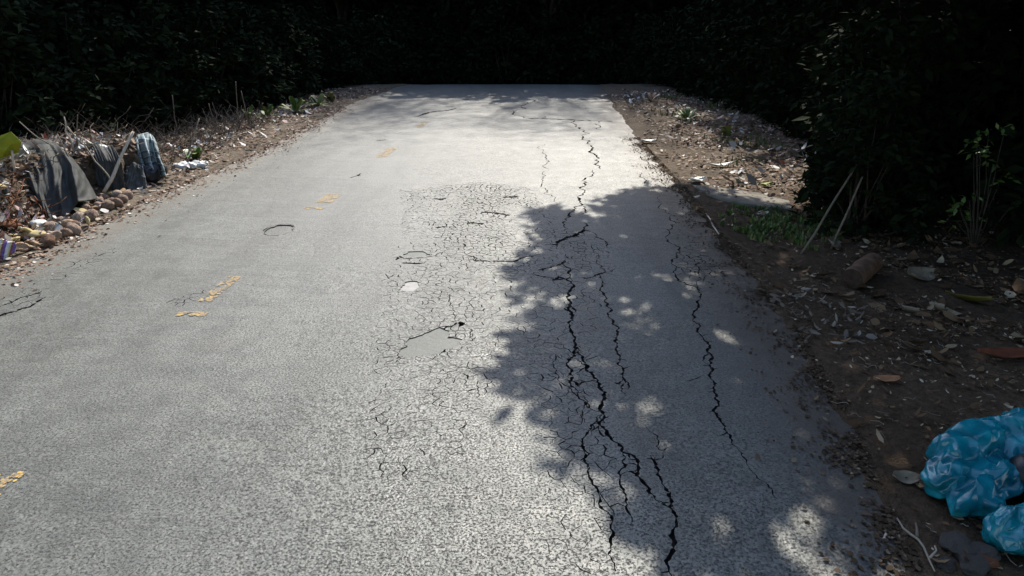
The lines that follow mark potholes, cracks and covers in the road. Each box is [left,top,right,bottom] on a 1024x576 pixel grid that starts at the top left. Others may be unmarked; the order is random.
pothole [401,281,419,291]
crack [657,196,777,499]
crack [0,248,117,316]
pothole [396,327,462,367]
crack [363,120,678,576]
